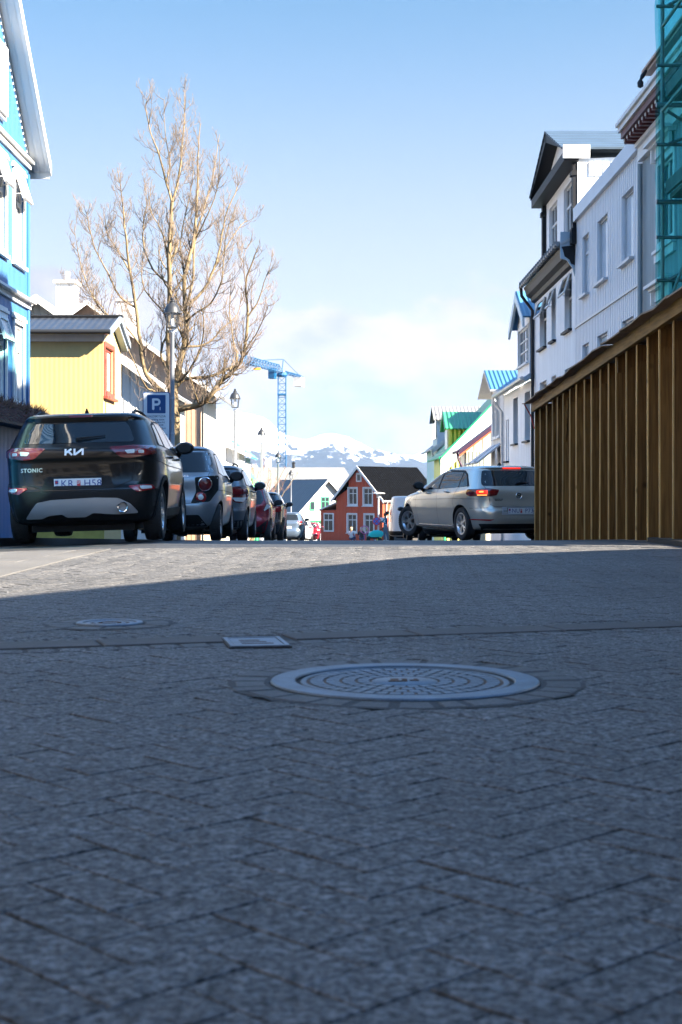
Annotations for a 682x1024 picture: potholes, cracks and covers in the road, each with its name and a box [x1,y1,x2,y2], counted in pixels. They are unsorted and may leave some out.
manhole cover [76,619,143,627]
manhole cover [221,636,292,649]
manhole cover [270,663,540,702]
